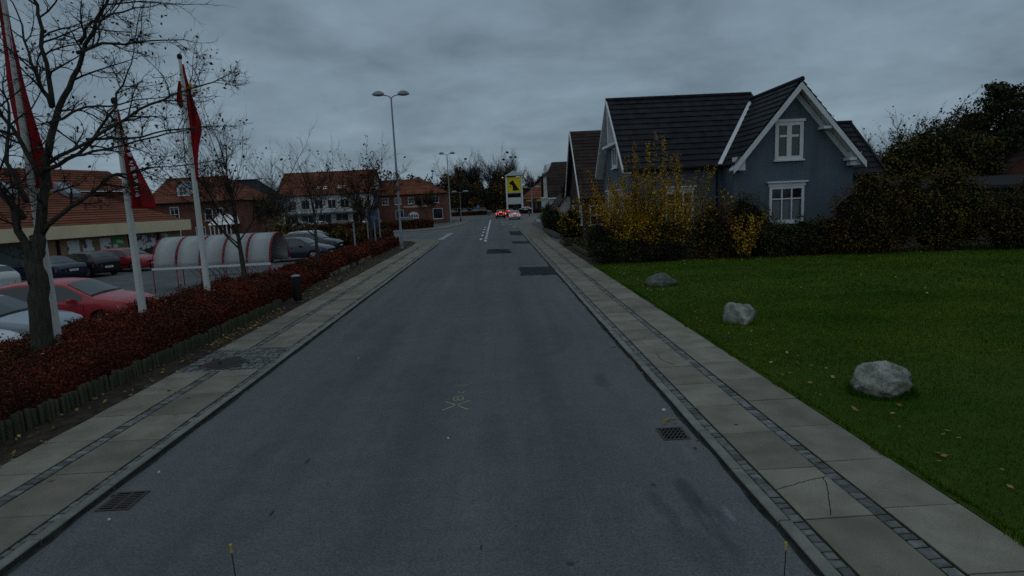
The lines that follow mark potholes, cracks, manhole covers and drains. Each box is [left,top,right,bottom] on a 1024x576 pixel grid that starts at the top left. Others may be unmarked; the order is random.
drain grate [655,427,691,441]
drain grate [94,490,151,512]
crack [779,476,831,515]
